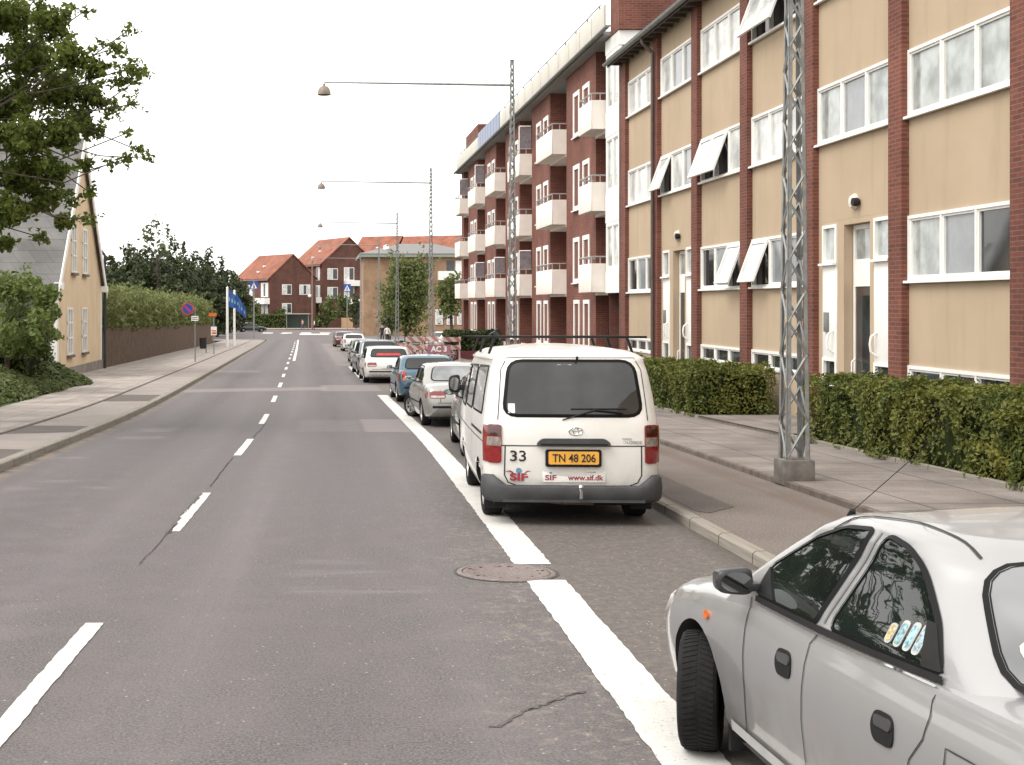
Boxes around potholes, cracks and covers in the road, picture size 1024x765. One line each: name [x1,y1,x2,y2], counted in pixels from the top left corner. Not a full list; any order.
crack [139,458,233,564]
crack [487,691,586,727]
manhole cover [454,563,559,582]
